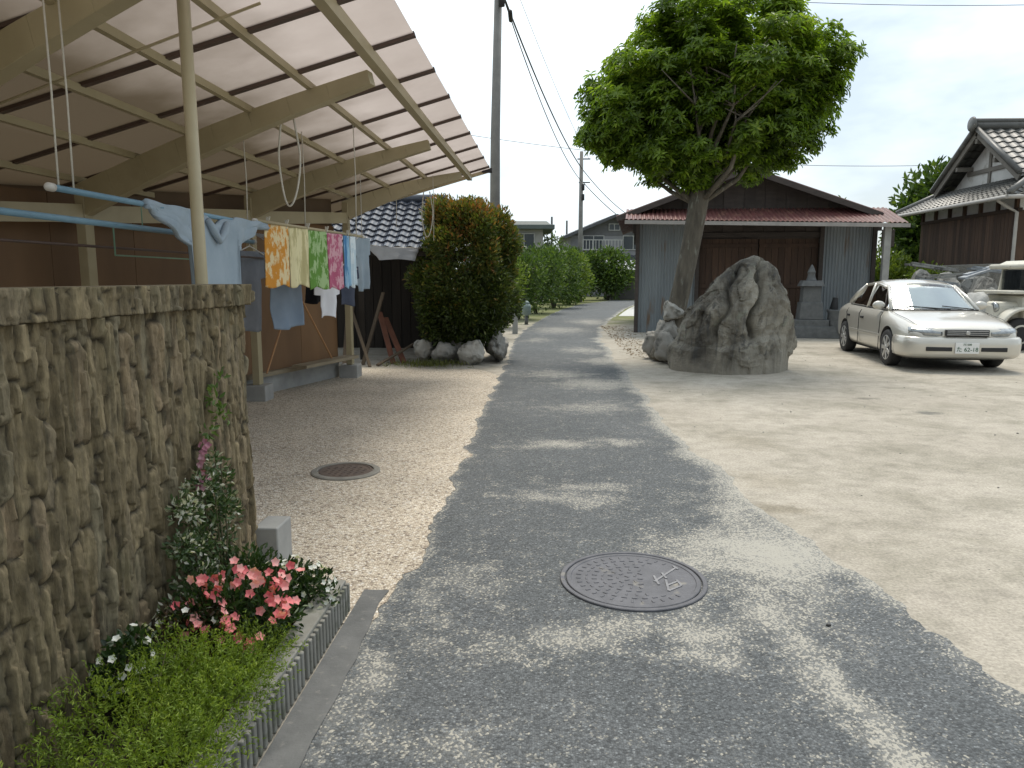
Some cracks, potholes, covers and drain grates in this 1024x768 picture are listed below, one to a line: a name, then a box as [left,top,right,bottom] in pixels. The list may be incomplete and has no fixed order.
manhole cover [311,462,380,481]
manhole cover [560,552,708,612]
